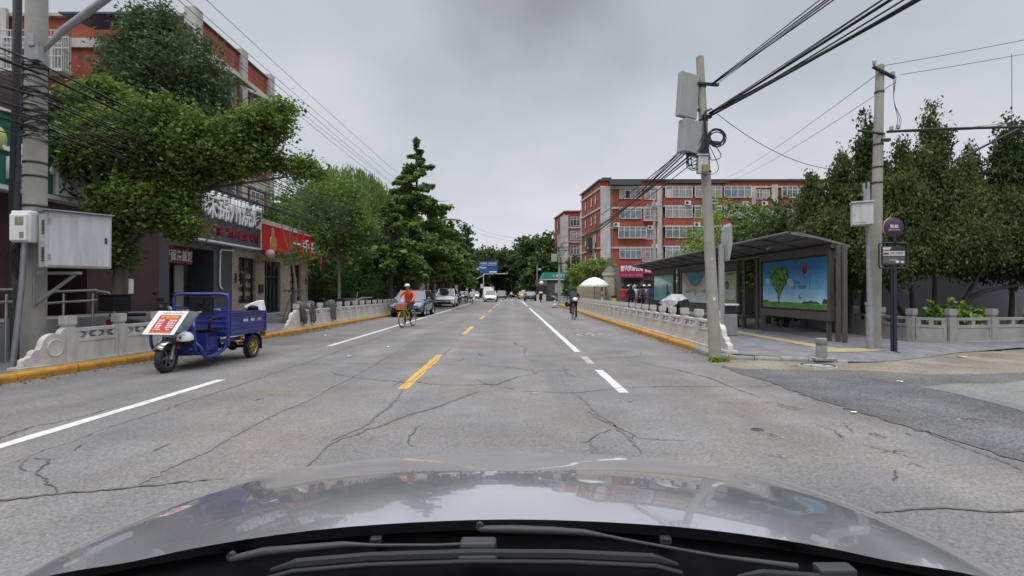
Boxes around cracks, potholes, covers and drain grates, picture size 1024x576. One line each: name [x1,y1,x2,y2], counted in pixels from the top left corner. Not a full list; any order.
crack [0,458,222,501]
crack [338,335,759,397]
crack [825,424,924,481]
crack [584,411,684,453]
